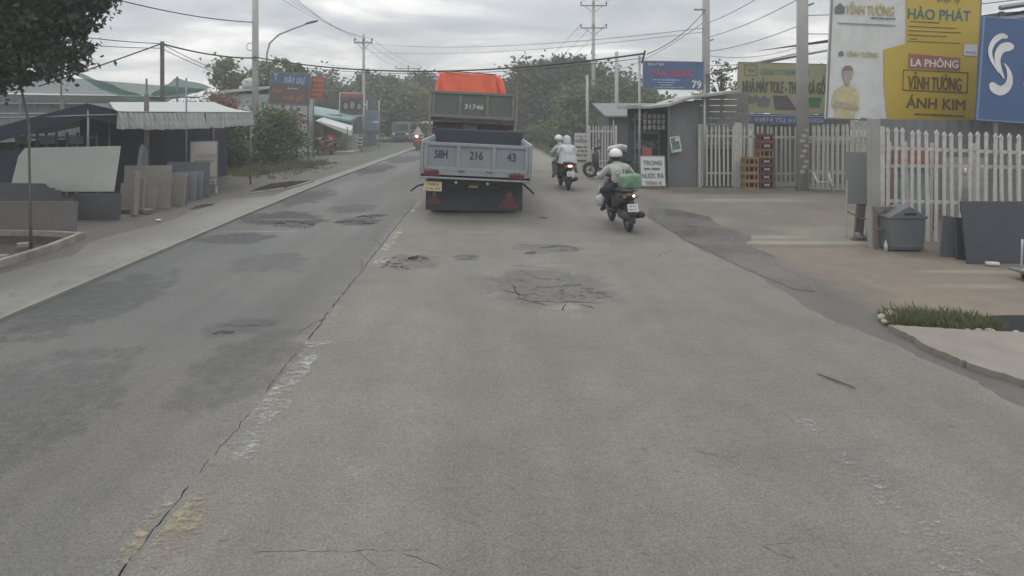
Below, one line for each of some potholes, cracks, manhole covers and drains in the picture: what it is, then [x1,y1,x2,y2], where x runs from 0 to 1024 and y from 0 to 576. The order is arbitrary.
crack [118,204,418,576]
pothole [523,284,613,303]
